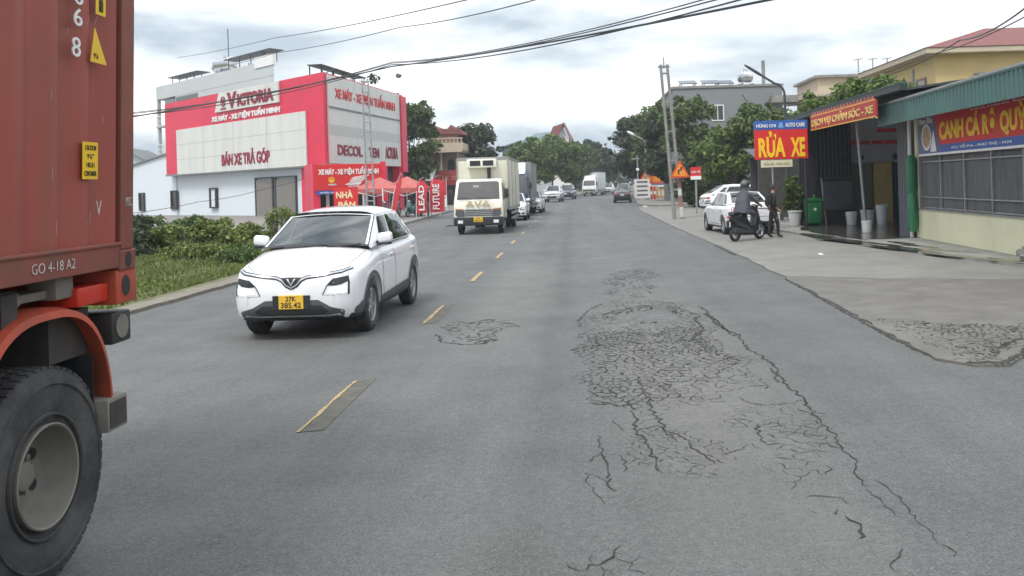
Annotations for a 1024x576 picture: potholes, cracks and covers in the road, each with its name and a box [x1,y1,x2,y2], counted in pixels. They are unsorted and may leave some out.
crack [435,319,520,345]
crack [566,546,646,576]
crack [571,269,957,571]
